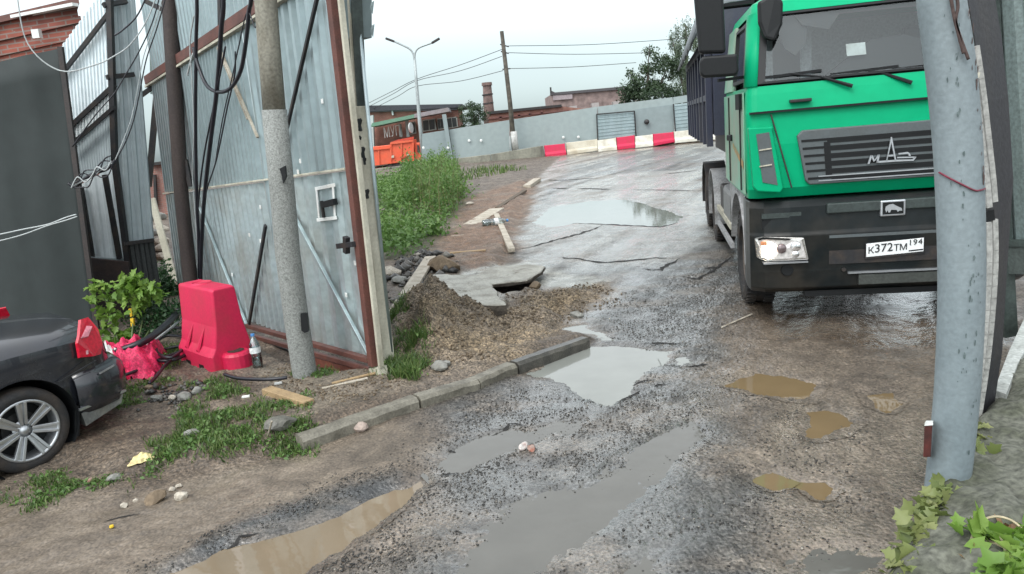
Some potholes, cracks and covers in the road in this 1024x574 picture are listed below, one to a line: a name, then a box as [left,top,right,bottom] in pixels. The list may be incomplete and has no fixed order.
pothole [794,402,869,443]
pothole [744,469,800,492]
pothole [493,282,532,294]
pothole [855,389,911,414]
pothole [148,470,442,574]
pothole [793,474,846,502]
crack [522,225,732,279]
pothole [715,367,832,404]
